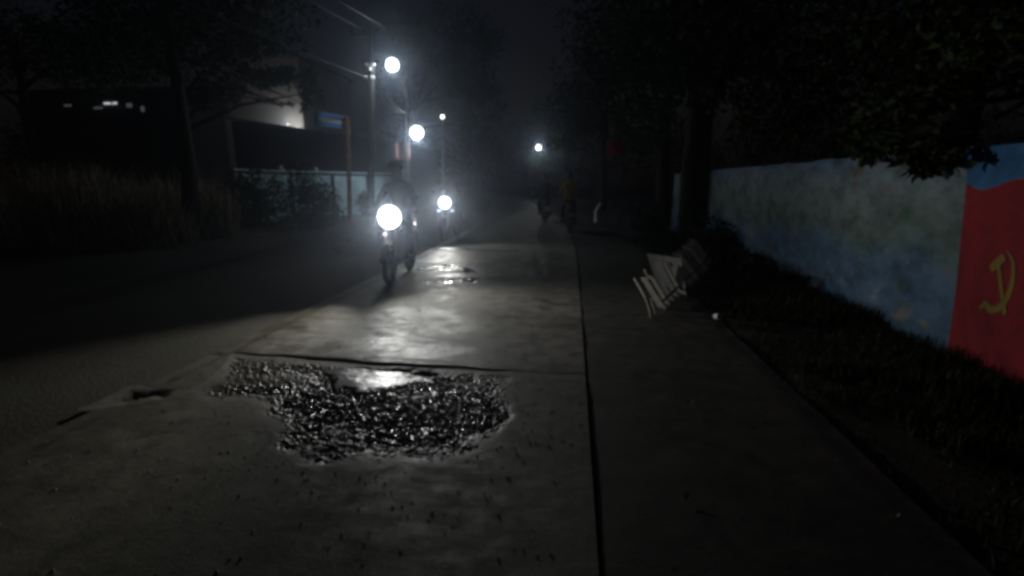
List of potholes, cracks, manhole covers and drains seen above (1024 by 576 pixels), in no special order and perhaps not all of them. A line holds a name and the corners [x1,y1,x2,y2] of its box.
pothole [79,385,182,411]
pothole [184,354,526,473]
